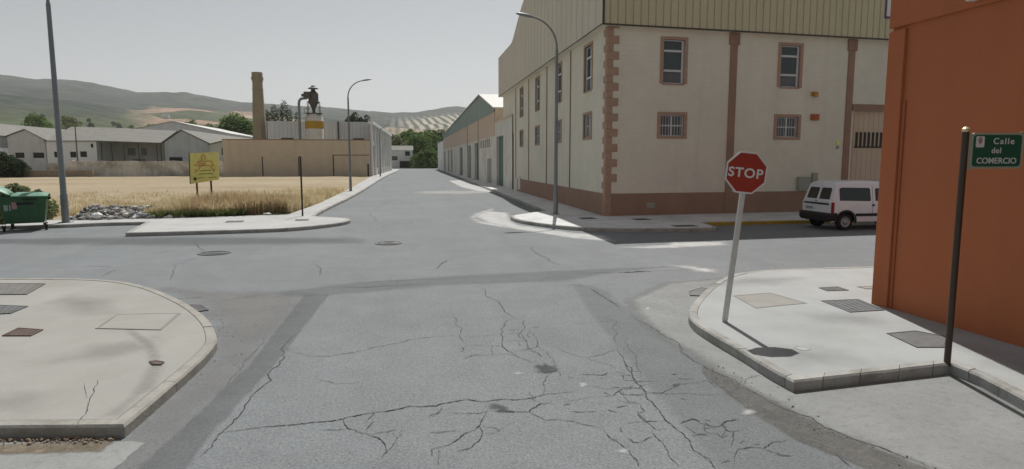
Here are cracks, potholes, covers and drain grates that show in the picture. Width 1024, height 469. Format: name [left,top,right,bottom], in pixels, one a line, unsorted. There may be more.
manhole cover [2,327,43,336]
crack [226,289,930,469]
manhole cover [733,293,806,308]
manhole cover [886,330,946,348]
manhole cover [95,313,181,330]
